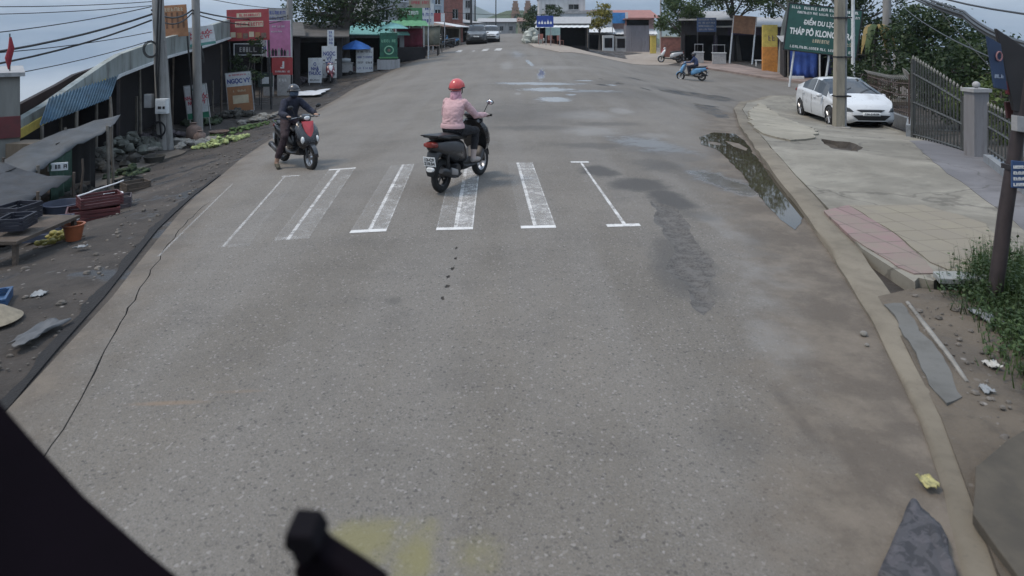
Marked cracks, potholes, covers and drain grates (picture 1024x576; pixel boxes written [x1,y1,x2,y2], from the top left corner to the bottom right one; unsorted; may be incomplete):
crack [45,203,208,454]
pothole [821,139,863,152]
